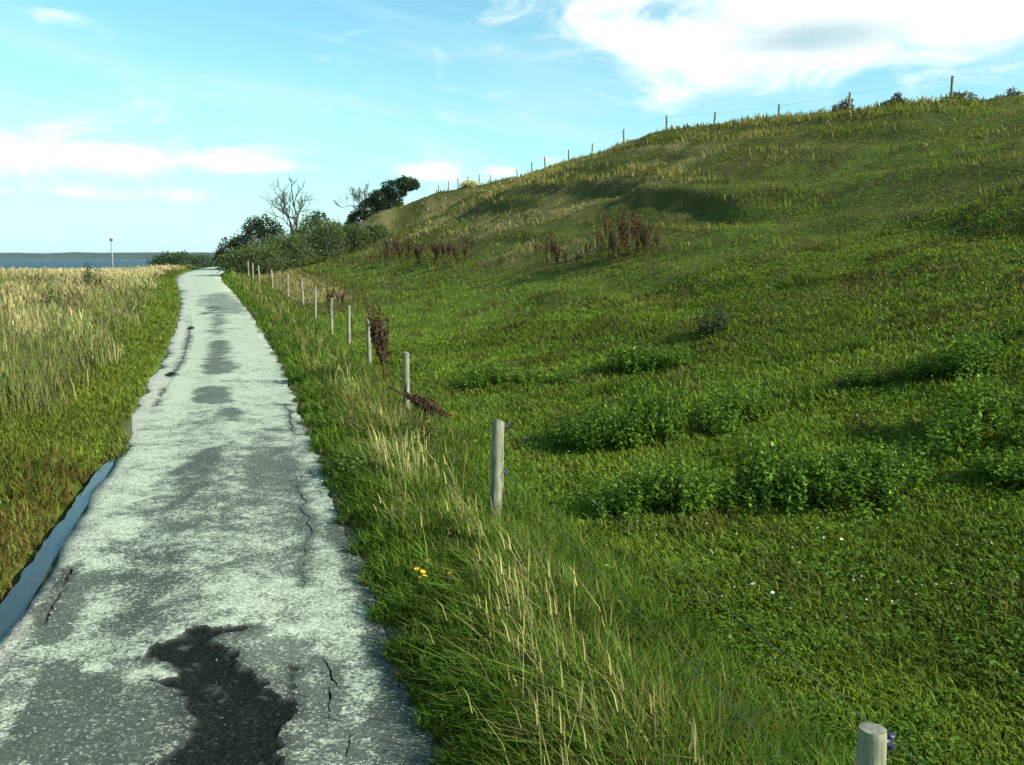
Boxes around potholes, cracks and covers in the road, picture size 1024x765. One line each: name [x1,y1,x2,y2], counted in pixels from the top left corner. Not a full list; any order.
crack [297,488,313,588]
crack [322,658,351,757]
crack [42,567,73,626]
